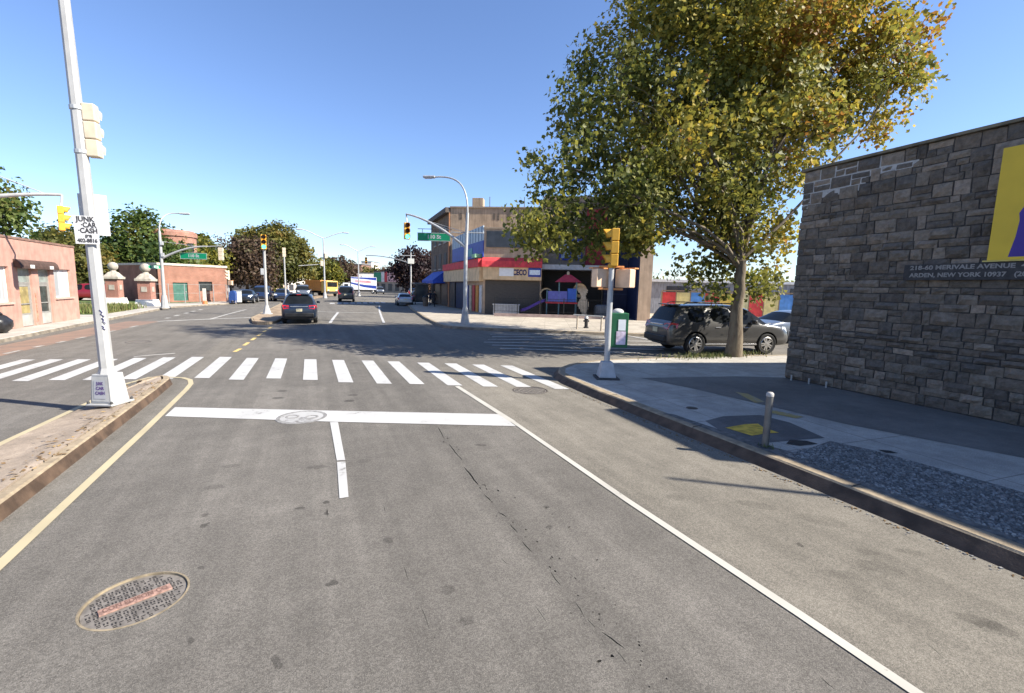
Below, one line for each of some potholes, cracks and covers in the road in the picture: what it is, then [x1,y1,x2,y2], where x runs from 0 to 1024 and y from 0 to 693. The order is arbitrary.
manhole cover [512,386,548,394]
manhole cover [75,571,190,631]
manhole cover [275,411,327,424]
